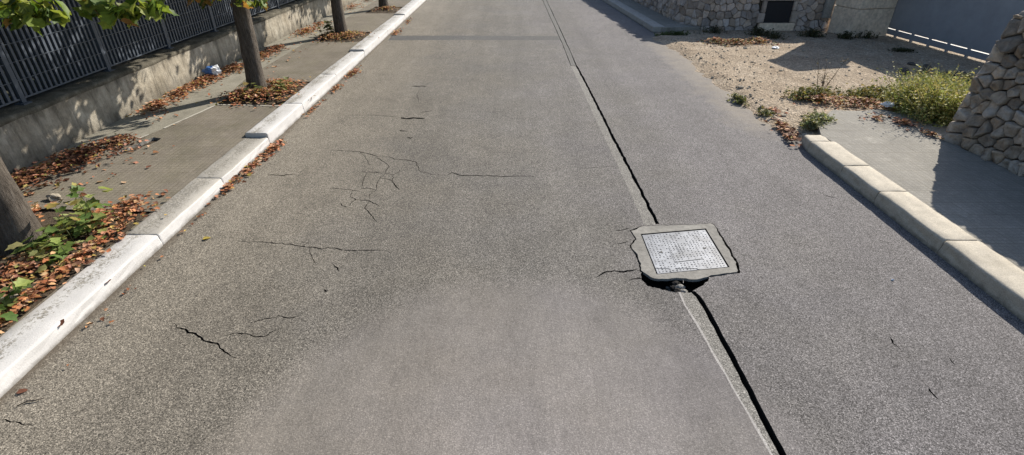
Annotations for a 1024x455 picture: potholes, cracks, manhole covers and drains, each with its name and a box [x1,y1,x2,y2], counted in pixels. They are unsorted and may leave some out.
crack [243,241,386,271]
crack [175,315,297,358]
crack [597,223,740,282]
crack [335,150,512,222]
crack [376,86,428,139]
manhole cover [631,223,738,282]
